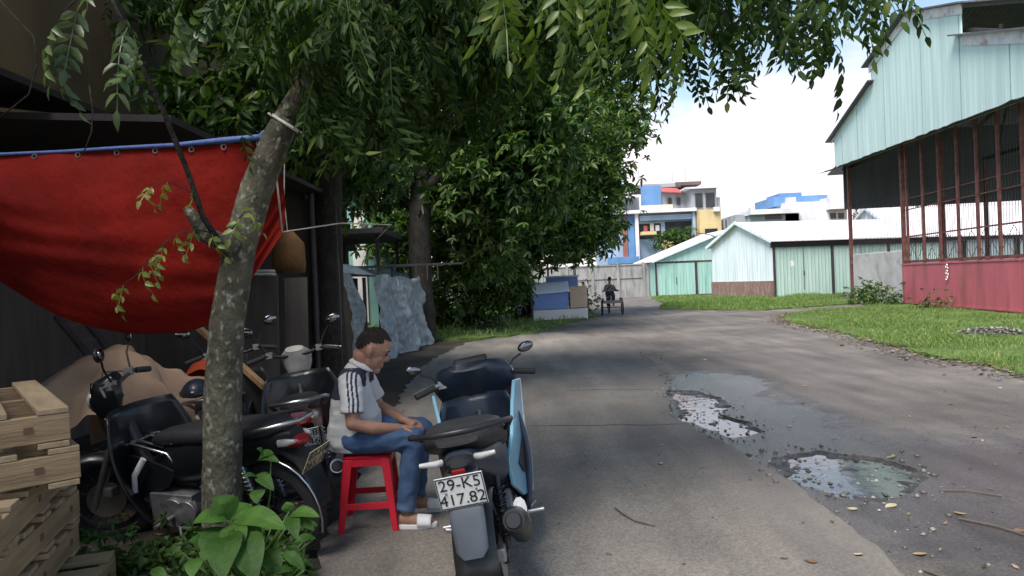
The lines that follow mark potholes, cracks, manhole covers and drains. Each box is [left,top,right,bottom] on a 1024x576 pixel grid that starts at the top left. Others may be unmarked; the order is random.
pothole [769,450,929,503]
pothole [667,390,761,438]
